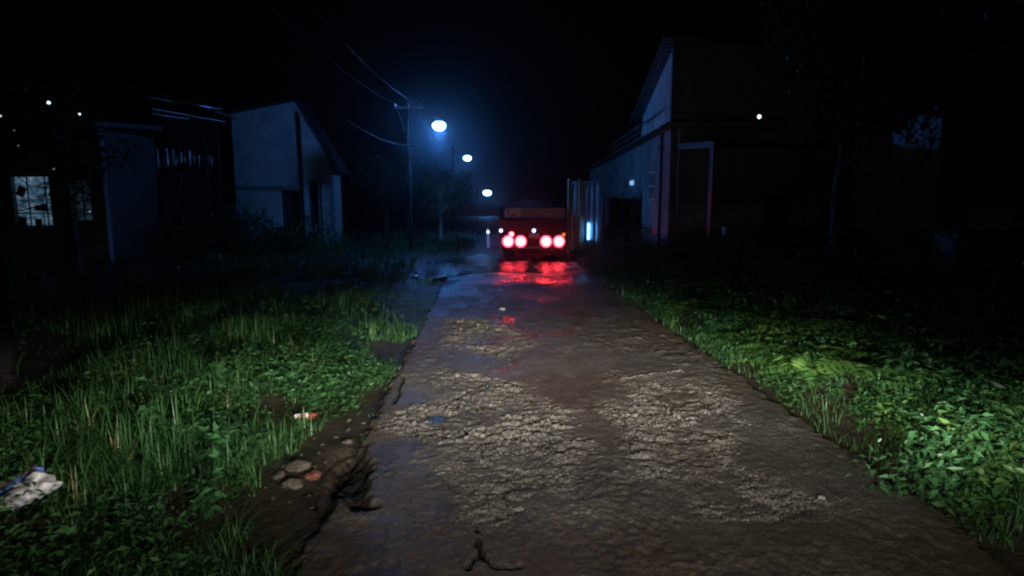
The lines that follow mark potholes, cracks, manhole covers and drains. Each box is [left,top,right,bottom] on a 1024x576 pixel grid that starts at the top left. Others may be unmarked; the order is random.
pothole [323,449,383,515]
